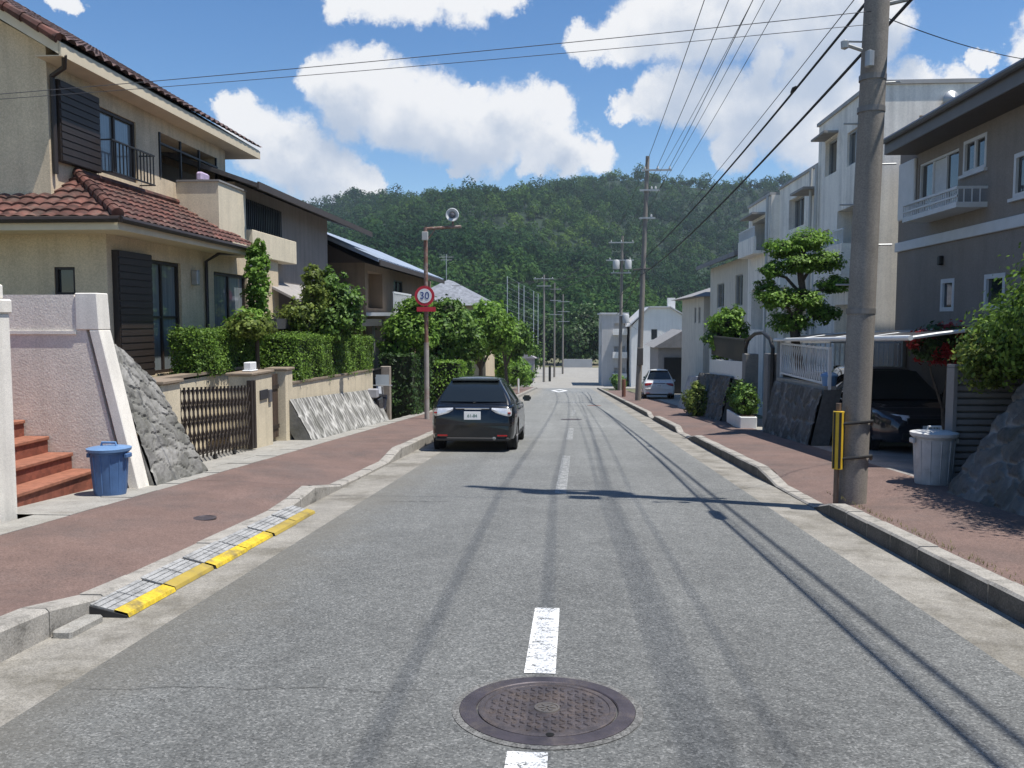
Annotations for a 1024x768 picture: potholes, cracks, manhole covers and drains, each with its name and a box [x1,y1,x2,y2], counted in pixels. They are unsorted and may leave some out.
manhole cover [452,675,643,750]
